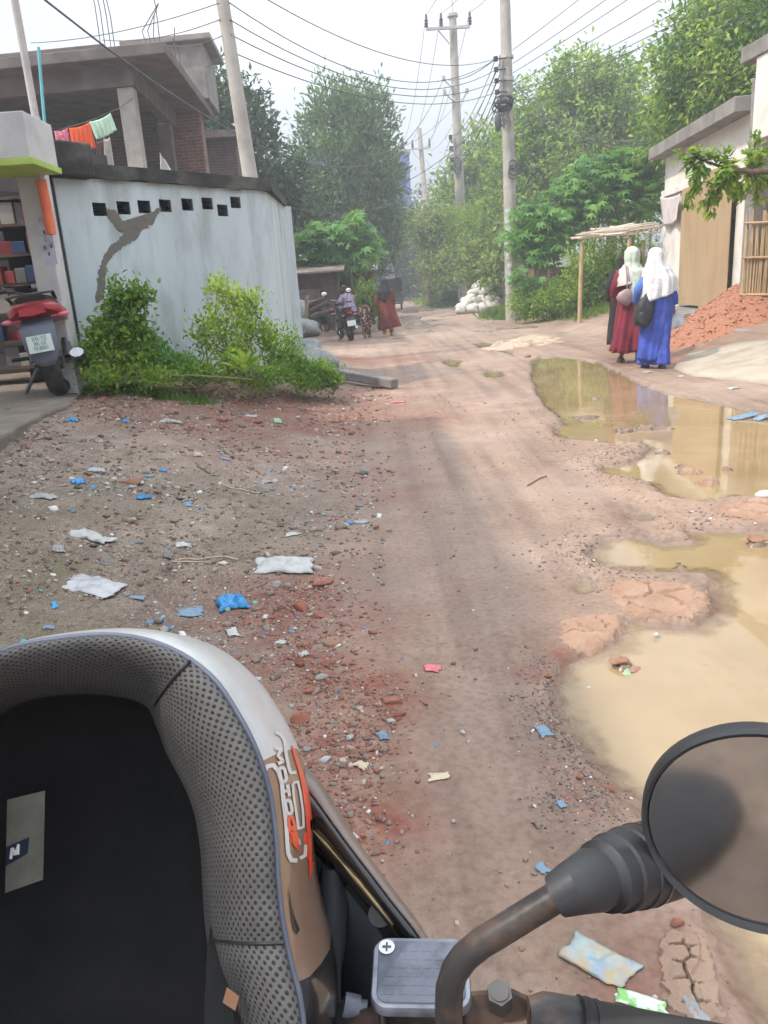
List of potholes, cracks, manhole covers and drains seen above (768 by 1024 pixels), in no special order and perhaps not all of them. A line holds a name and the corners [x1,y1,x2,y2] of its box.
crack [658,929,727,1021]
pothole [524,353,768,503]
pothole [478,368,514,378]
pothole [434,357,472,368]
